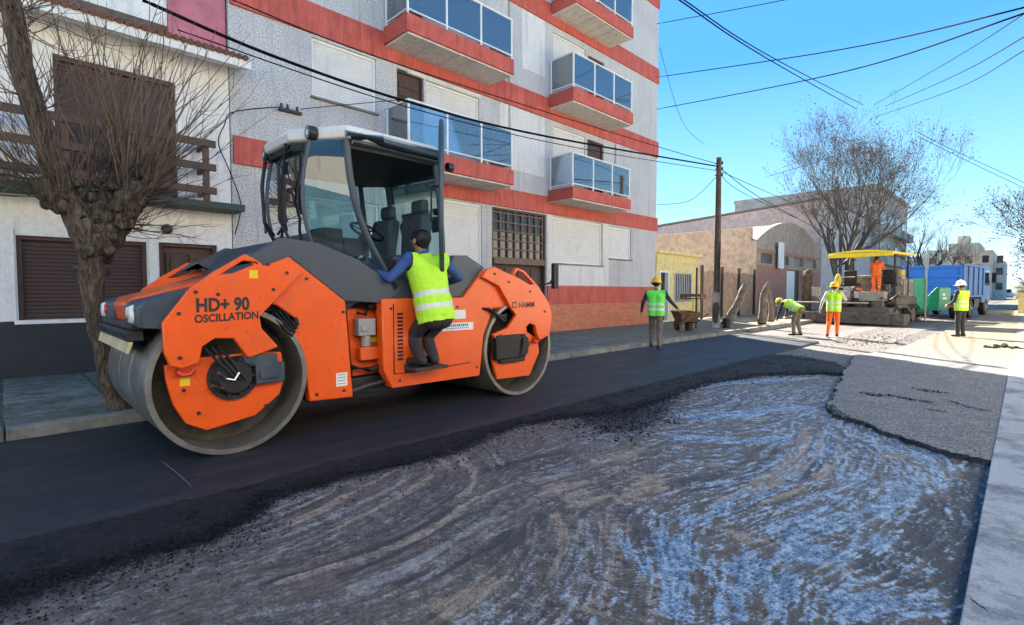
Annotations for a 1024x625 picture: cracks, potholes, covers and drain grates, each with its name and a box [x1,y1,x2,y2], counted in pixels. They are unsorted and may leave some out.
crack [860,388,984,412]
